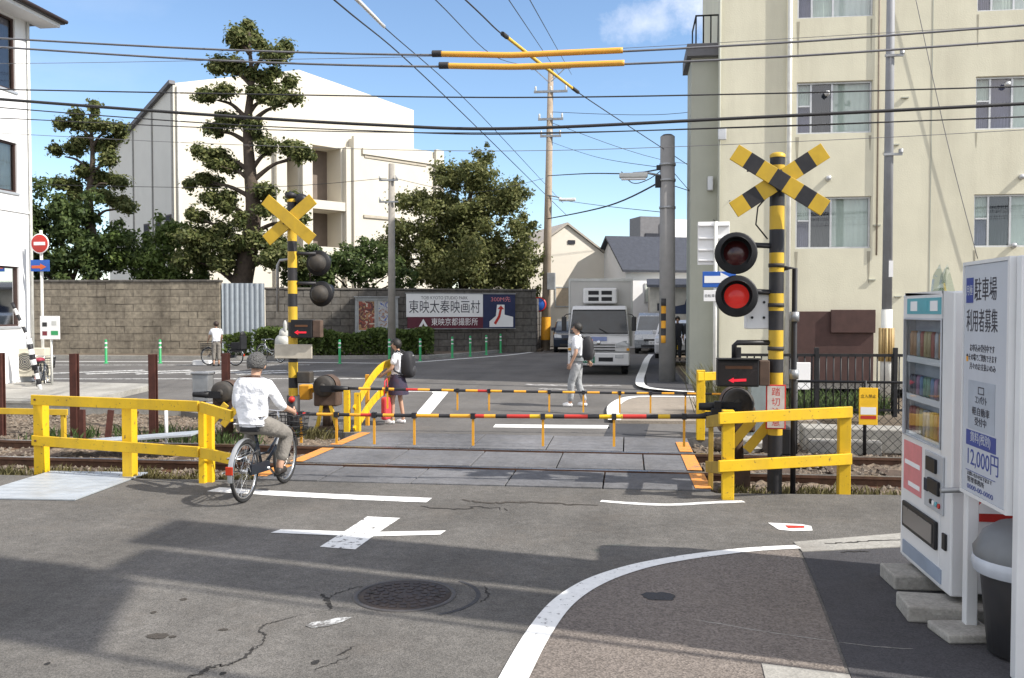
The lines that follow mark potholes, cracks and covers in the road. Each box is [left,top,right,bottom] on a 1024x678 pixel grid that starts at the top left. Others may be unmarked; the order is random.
crack [321,586,362,609]
manhole cover [353,579,456,612]
crack [187,614,303,678]
crack [424,499,591,511]
